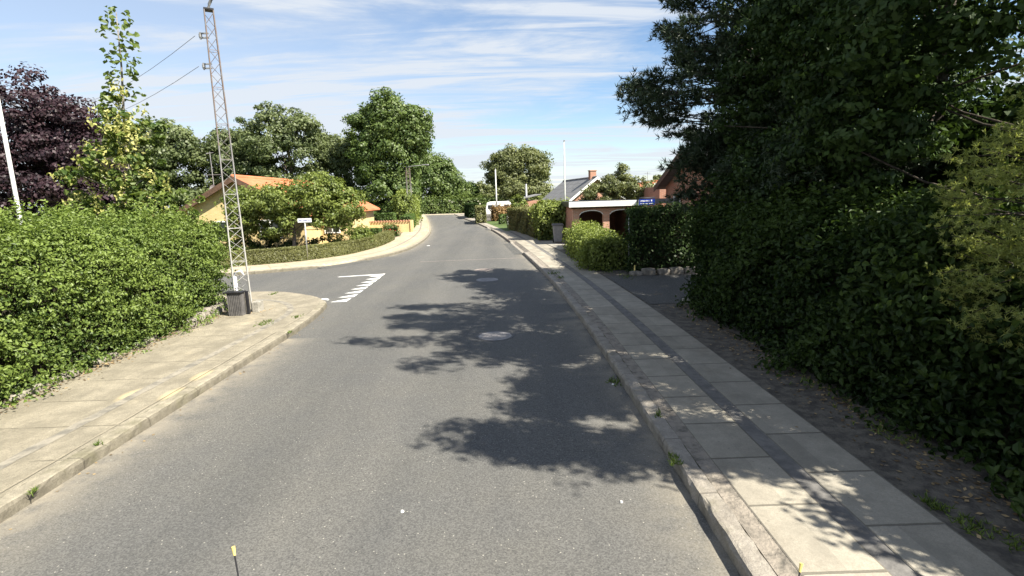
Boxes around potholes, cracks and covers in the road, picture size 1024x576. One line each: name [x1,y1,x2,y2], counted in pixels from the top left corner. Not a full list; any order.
manhole cover [475,331,515,341]
